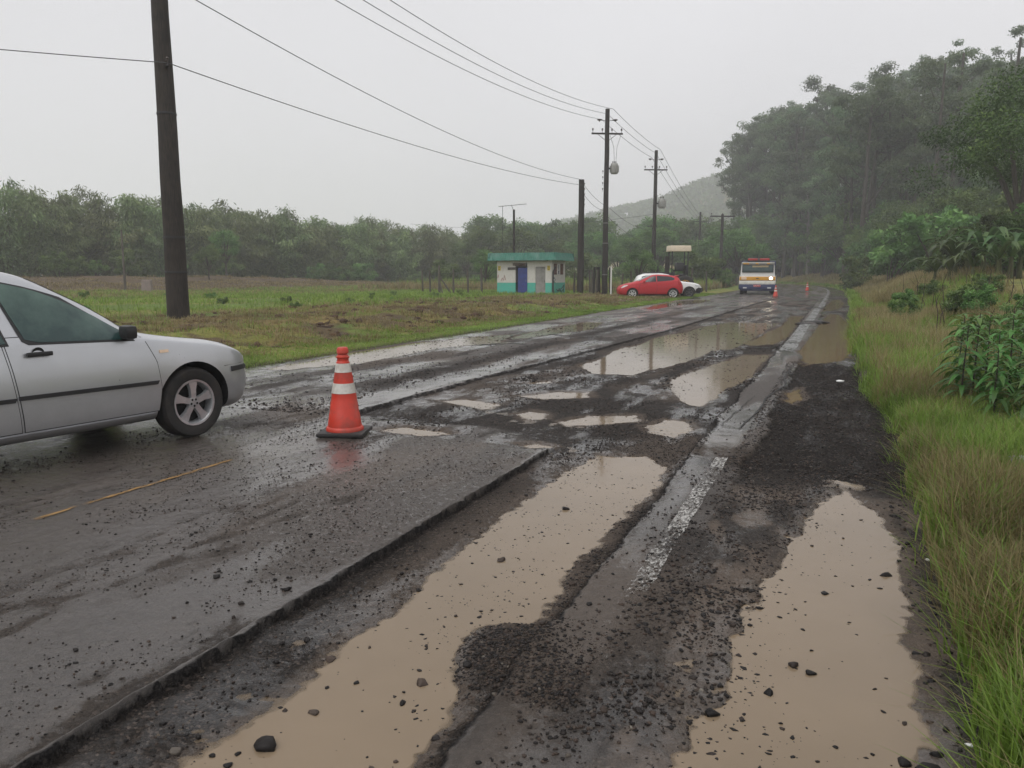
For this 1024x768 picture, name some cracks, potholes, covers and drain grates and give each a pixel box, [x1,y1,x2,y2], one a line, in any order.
pothole [434,398,507,411]
pothole [551,412,647,427]
pothole [635,418,700,439]
pothole [665,354,774,407]
pothole [162,451,679,768]
pothole [372,423,463,437]
pothole [575,322,780,377]
pothole [646,480,962,768]
